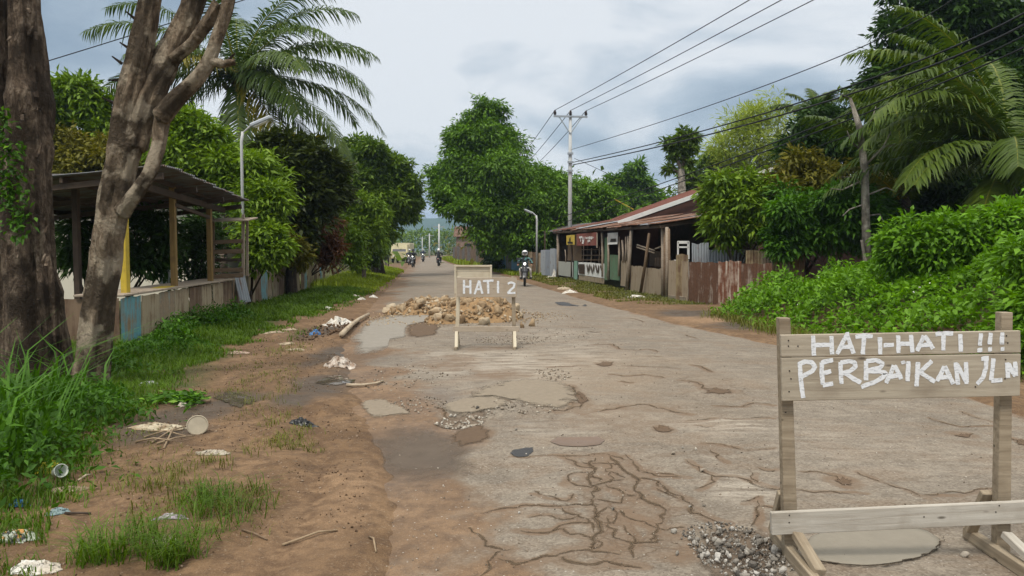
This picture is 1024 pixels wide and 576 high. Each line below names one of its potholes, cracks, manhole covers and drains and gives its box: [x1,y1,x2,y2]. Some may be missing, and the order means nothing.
crack [469,365,986,576]
pothole [452,425,489,445]
pothole [408,322,439,337]
